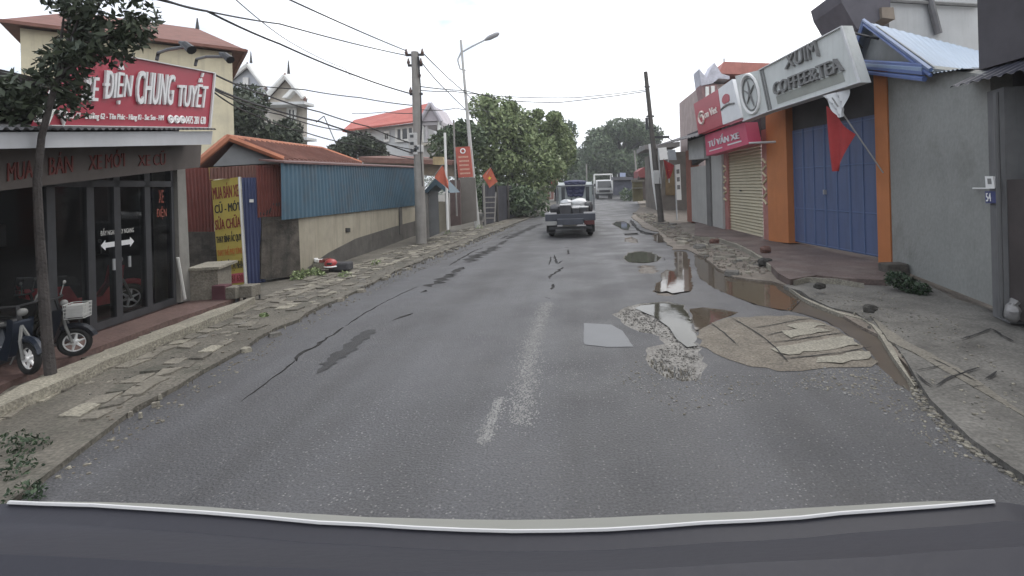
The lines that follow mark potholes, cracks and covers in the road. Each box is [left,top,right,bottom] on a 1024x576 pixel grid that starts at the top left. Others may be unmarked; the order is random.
pothole [612,302,708,381]
crack [242,224,570,401]
crack [917,358,997,387]
pothole [623,251,662,263]
crack [961,328,1013,341]
